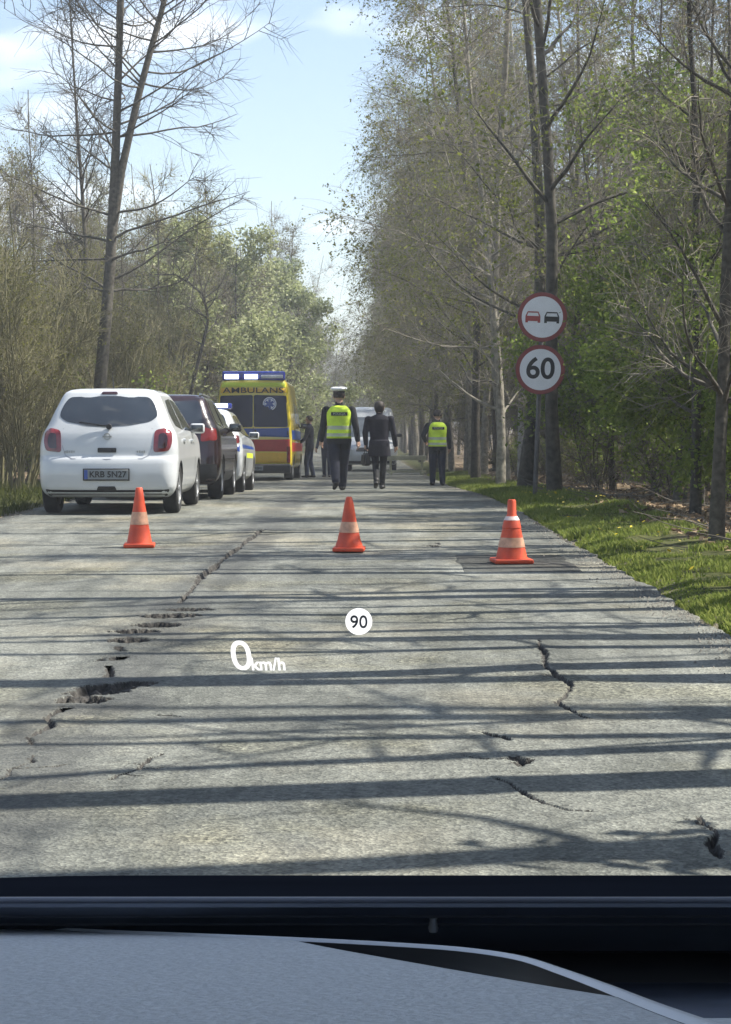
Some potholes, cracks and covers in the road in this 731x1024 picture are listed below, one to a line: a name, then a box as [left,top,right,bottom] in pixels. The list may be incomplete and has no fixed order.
crack [0,749,198,789]
crack [460,772,731,869]
pothole [26,677,187,709]
crack [433,637,620,746]
